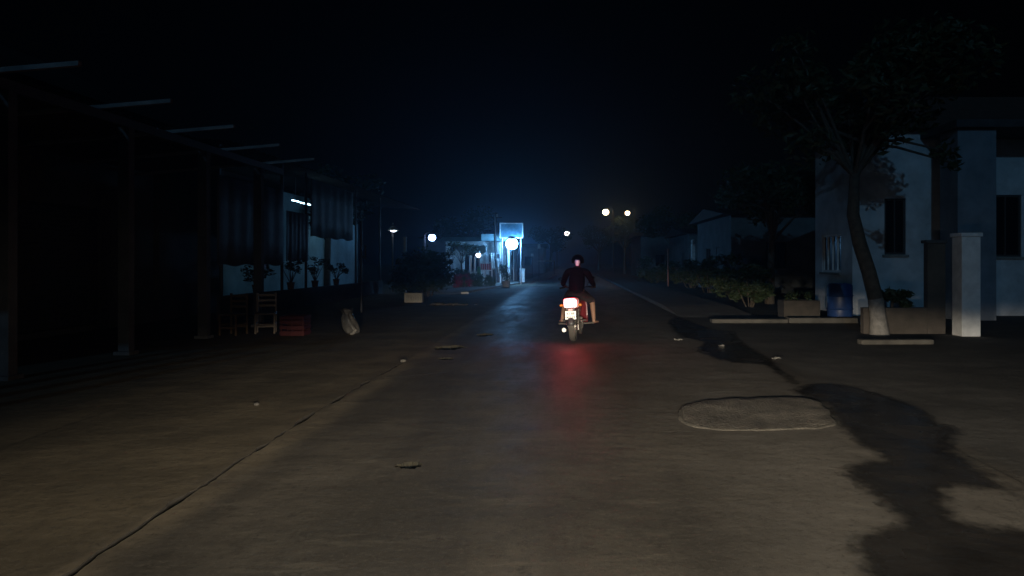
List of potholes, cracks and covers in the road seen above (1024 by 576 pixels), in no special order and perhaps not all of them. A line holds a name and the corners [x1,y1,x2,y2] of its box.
pothole [395,461,423,469]
